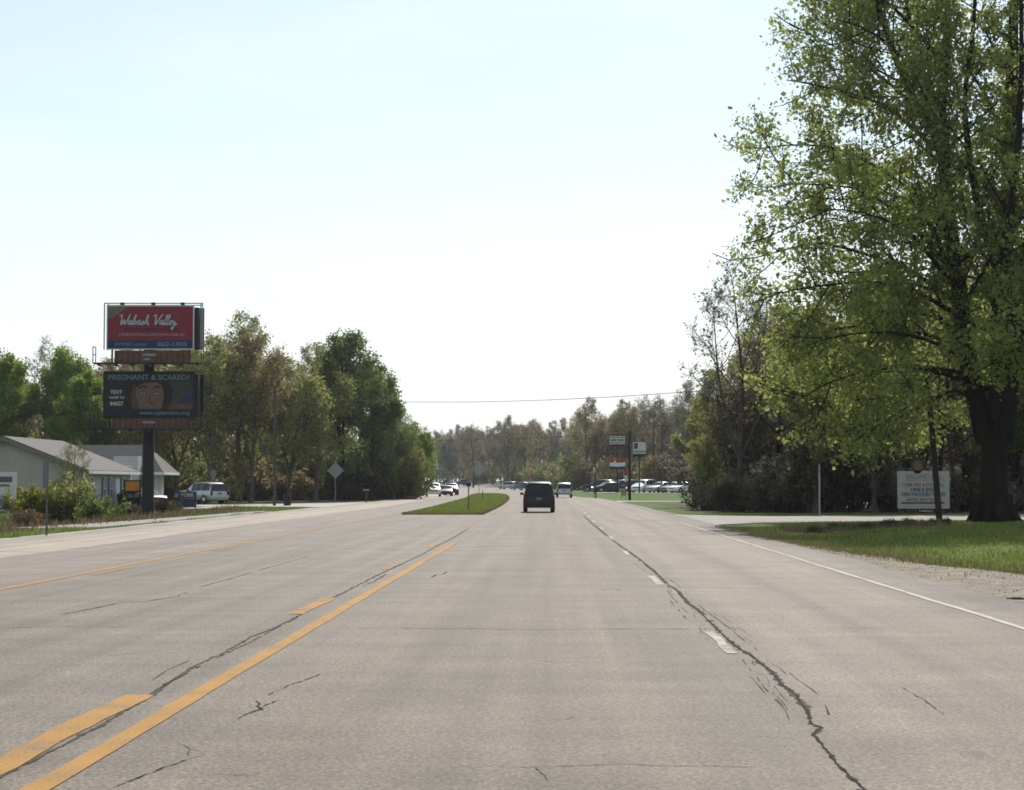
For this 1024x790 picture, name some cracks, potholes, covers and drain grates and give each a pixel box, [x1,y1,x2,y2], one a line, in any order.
crack [431,517,867,790]
crack [237,674,319,719]
crack [117,744,204,786]
